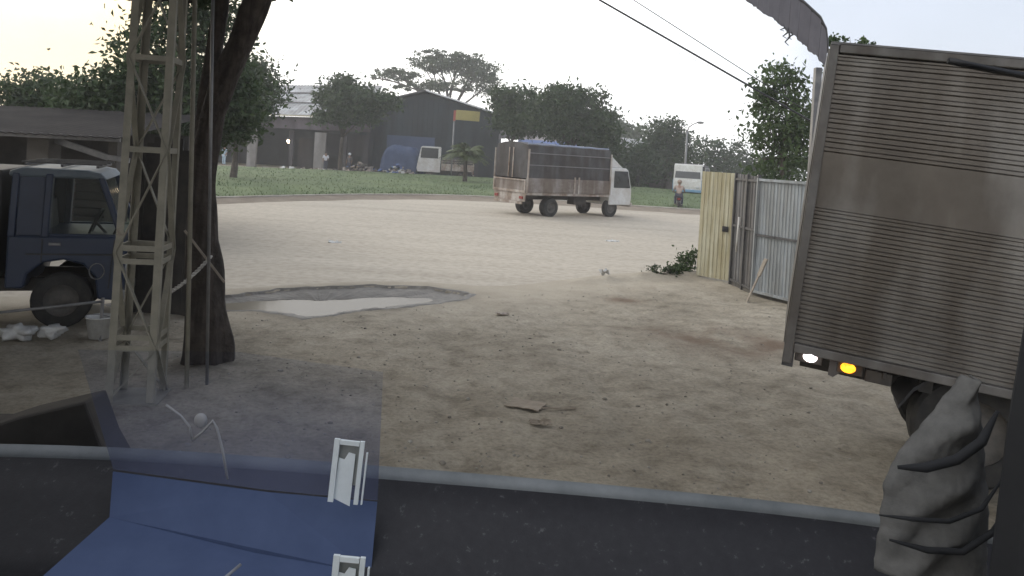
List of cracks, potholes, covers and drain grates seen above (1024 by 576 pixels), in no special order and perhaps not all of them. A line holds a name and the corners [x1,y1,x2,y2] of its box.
pothole [104,284,476,320]
